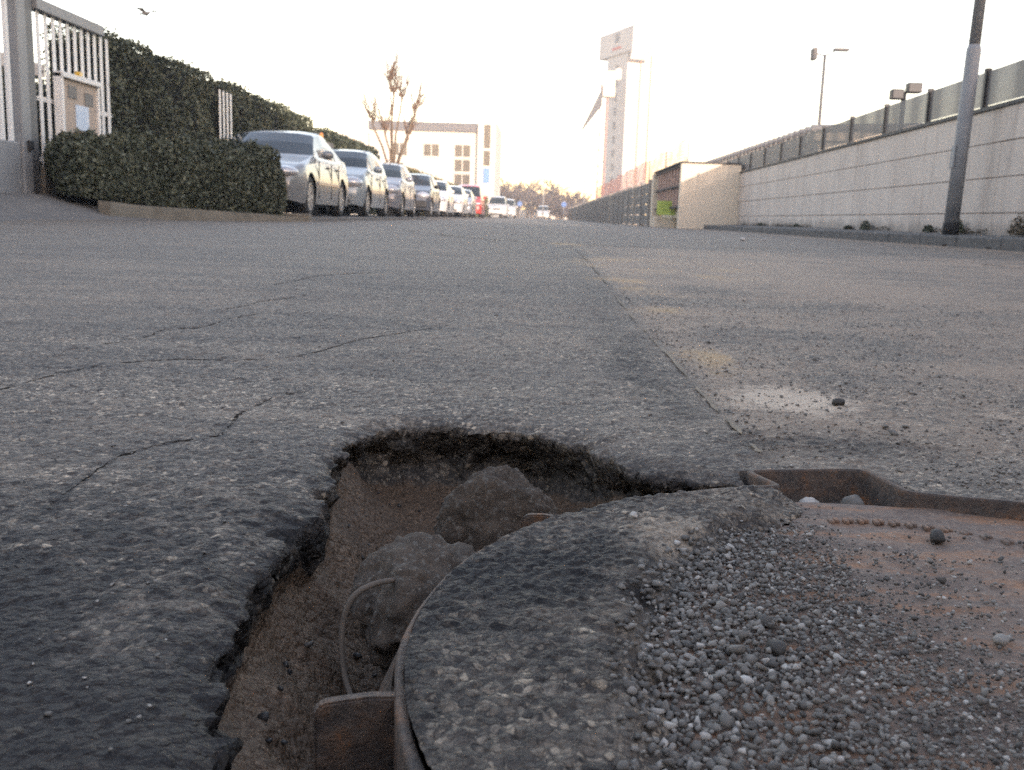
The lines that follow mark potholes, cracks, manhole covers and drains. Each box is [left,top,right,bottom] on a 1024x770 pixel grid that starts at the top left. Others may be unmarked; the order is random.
crack [0,325,448,390]
crack [49,392,304,504]
crack [104,273,361,344]
manhole cover [405,484,1024,770]
pothole [208,430,716,770]
